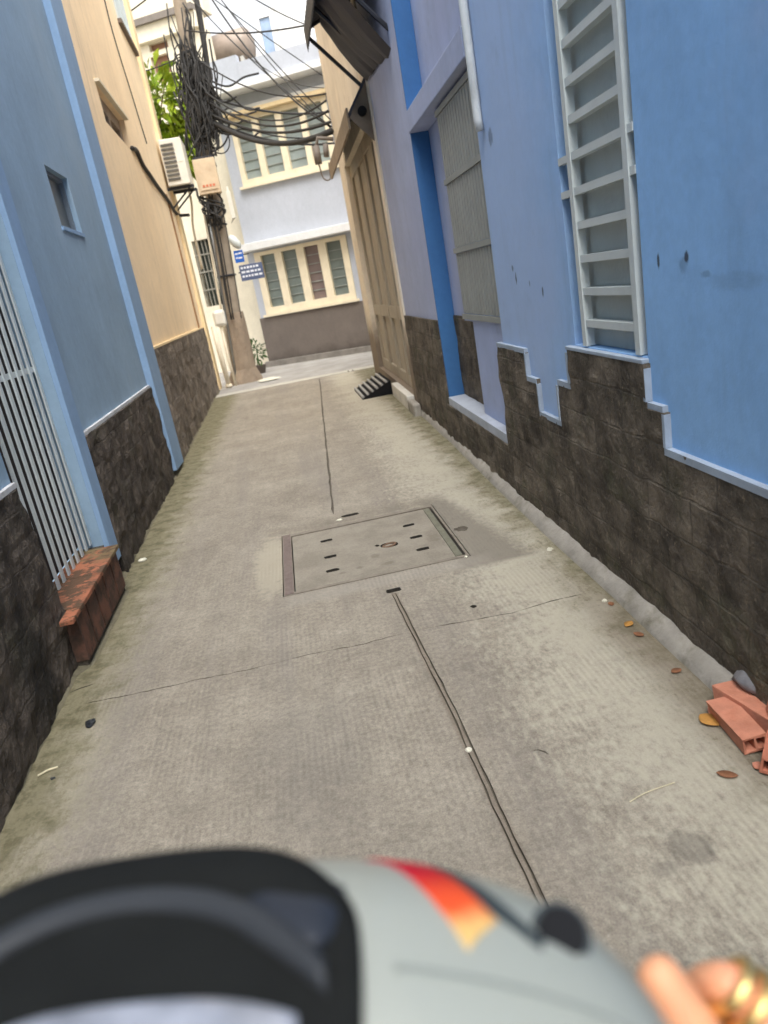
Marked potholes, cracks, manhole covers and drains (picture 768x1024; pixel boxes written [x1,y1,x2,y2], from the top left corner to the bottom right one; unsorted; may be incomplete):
manhole cover [282,505,470,597]
